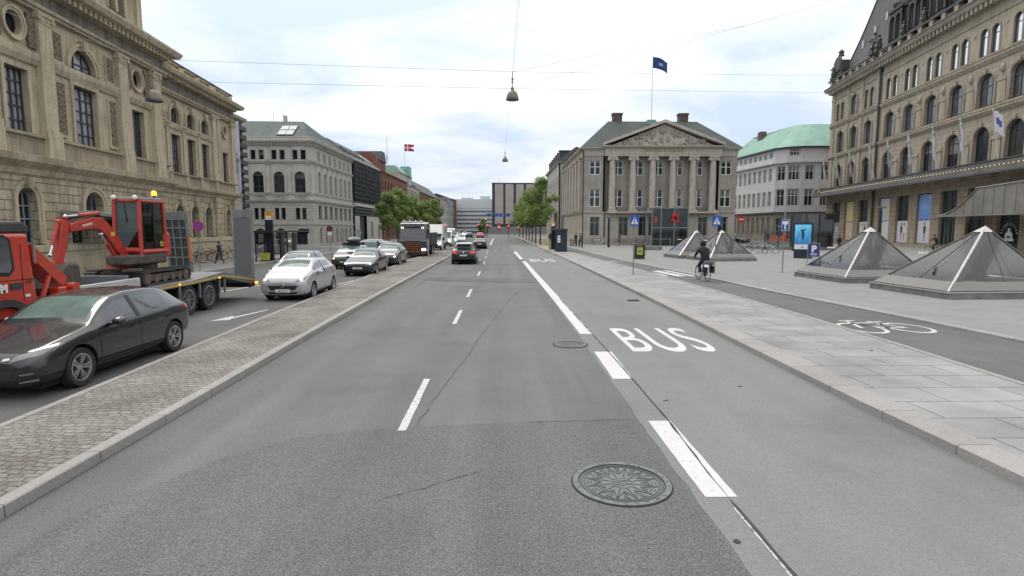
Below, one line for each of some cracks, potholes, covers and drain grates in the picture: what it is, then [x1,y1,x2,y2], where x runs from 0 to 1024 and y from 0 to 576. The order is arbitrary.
manhole cover [571,462,673,508]
crack [416,280,538,425]
